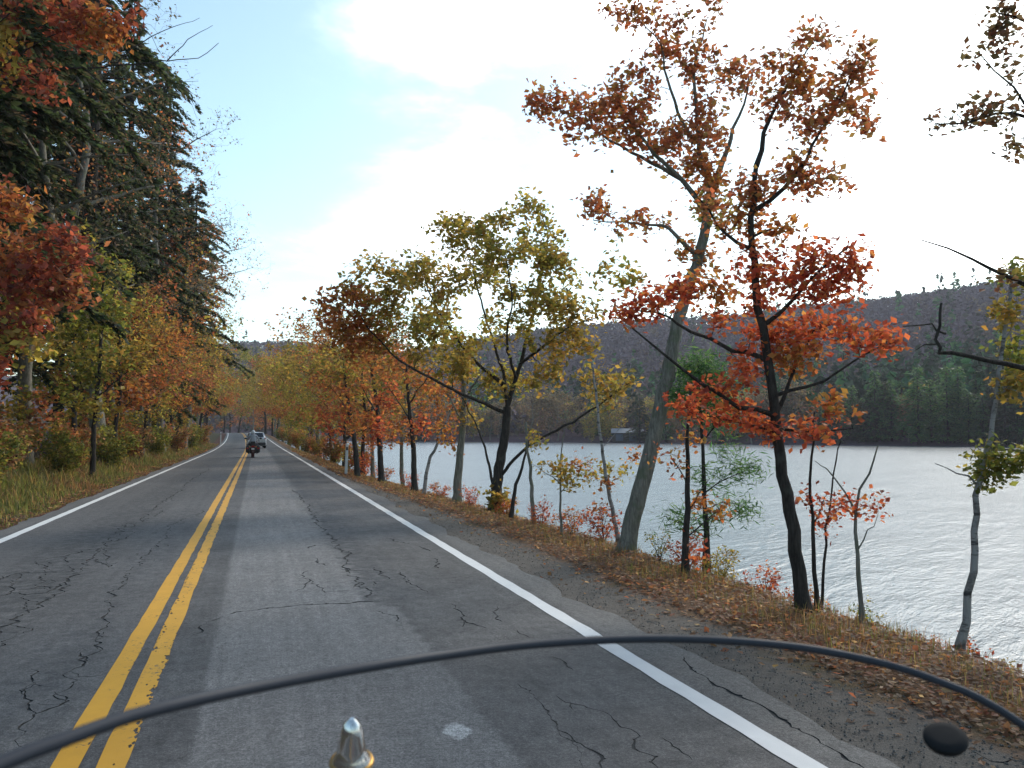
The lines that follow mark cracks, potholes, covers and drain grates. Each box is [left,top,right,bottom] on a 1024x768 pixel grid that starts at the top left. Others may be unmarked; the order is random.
crack [192,490,428,636]
crack [518,684,691,768]
crack [0,470,208,747]
crack [683,658,864,768]
